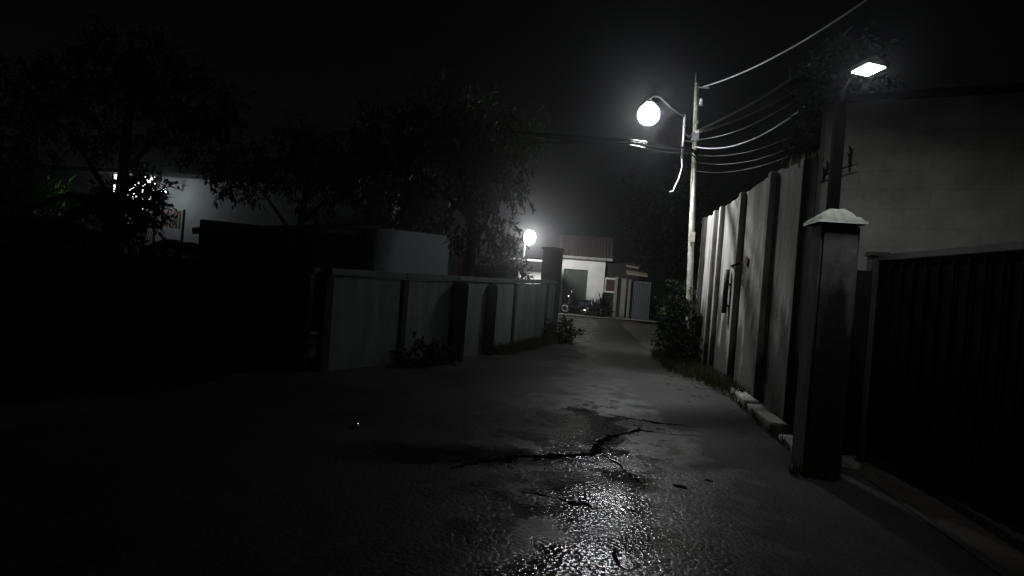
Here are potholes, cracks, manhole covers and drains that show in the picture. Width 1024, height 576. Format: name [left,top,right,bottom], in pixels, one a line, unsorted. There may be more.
crack [448,414,710,511]
crack [612,549,631,572]
